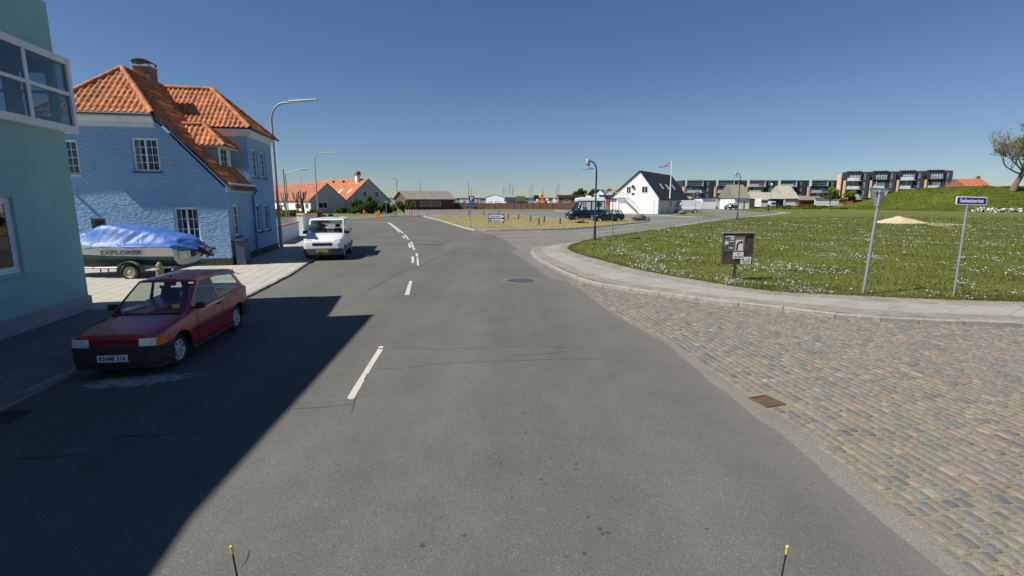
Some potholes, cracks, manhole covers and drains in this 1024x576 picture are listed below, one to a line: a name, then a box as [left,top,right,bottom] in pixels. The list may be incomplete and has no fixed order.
drain grate [748,395,786,408]
crack [299,346,562,414]
